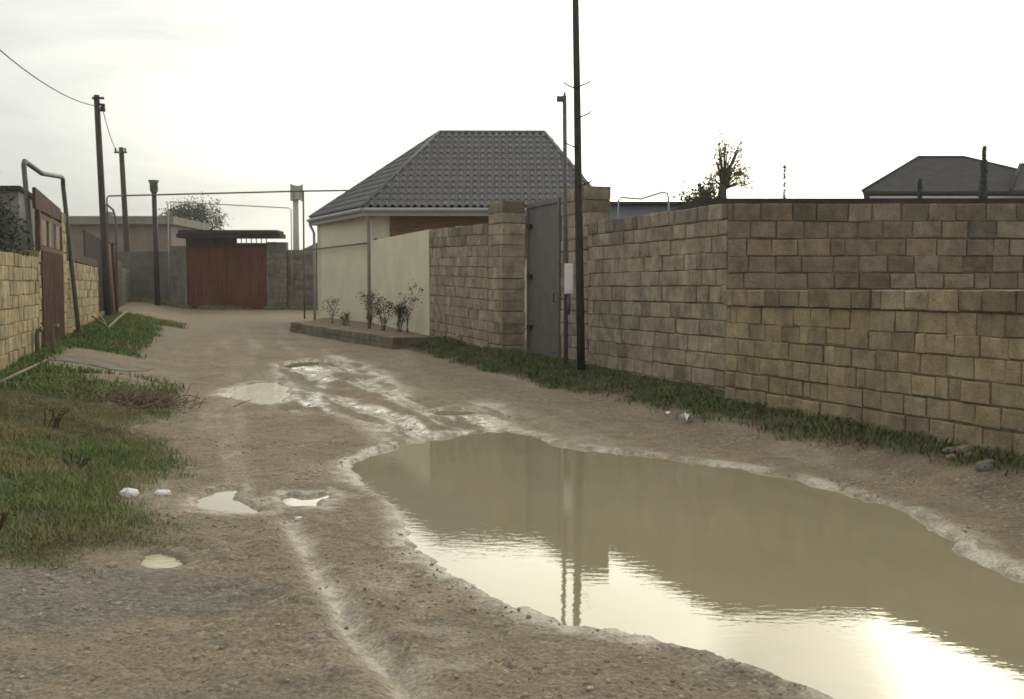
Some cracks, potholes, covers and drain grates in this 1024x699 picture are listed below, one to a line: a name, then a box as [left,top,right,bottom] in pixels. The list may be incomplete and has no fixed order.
pothole [177,482,278,516]
pothole [119,544,203,571]
pothole [213,380,304,405]
pothole [330,427,1024,699]
pothole [266,485,345,510]
